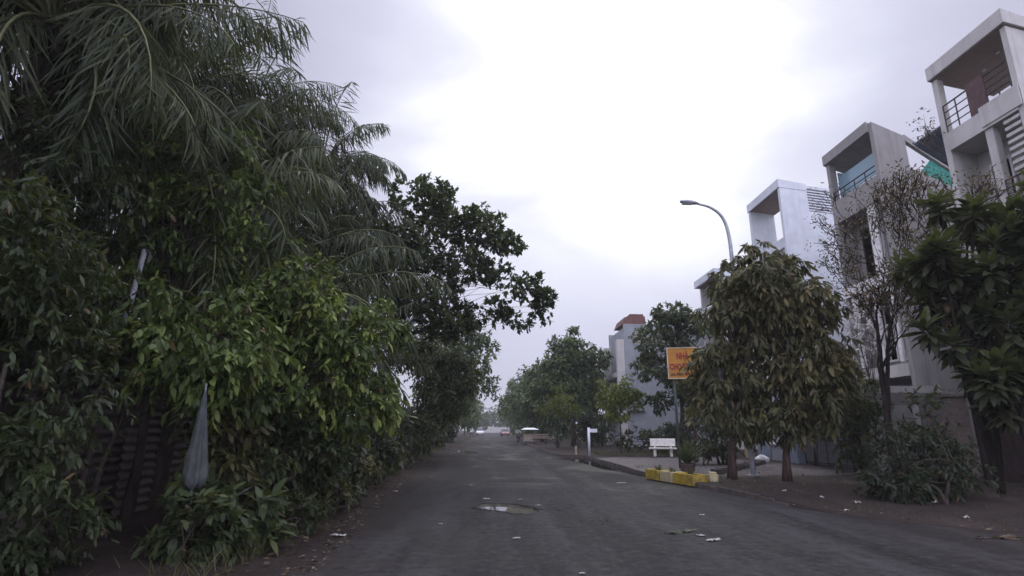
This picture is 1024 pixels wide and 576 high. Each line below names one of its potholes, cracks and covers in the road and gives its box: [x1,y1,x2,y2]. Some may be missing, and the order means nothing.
pothole [470,503,545,515]
